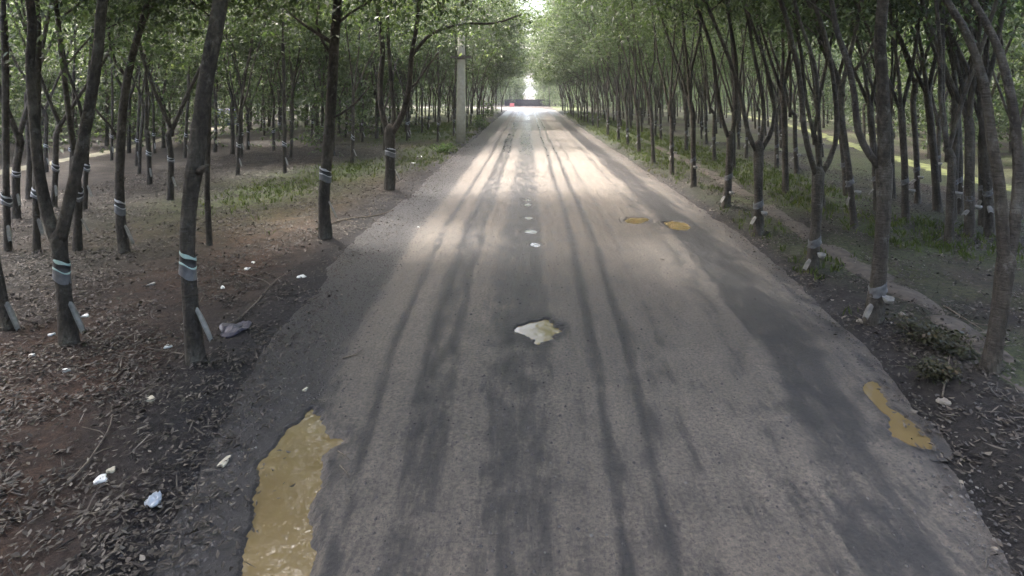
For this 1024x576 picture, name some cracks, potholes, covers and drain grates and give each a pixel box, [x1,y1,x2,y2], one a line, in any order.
pothole [847,373,954,462]
pothole [212,399,363,576]
pothole [620,216,653,225]
pothole [501,312,577,350]
pothole [659,220,697,232]
